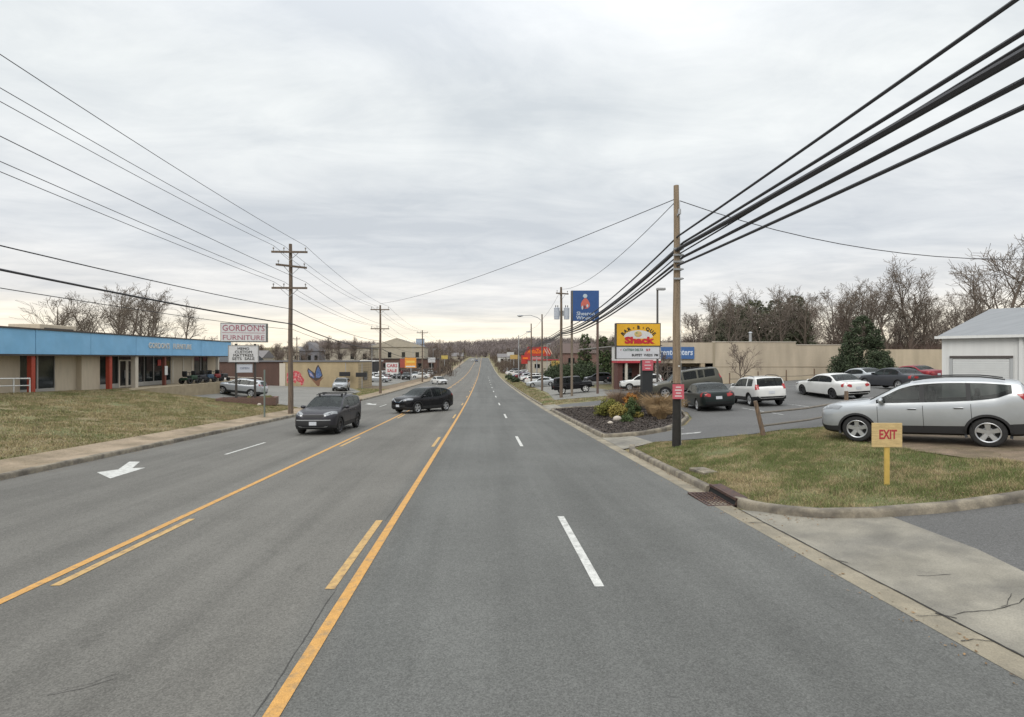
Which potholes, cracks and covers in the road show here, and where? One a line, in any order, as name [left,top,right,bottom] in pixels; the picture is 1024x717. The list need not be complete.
drain grate [688,483,748,507]
crack [955,593,1024,615]
